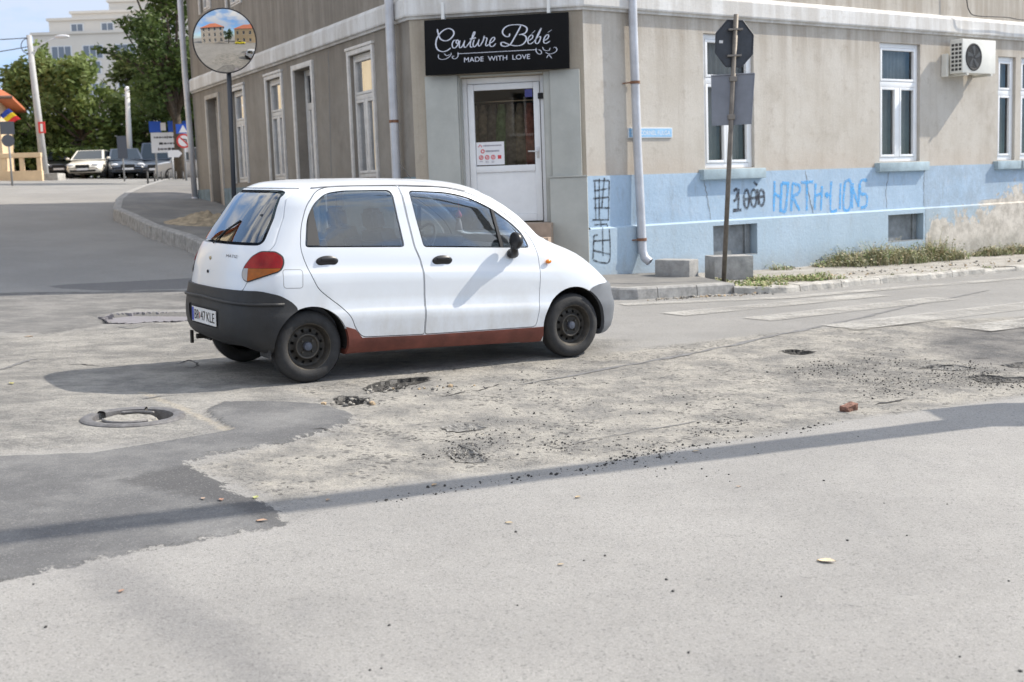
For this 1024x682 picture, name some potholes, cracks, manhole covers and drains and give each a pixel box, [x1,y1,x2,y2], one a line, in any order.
manhole cover [80,406,186,428]
pothole [363,377,429,392]
pothole [967,374,1024,383]
pothole [447,444,485,463]
pothole [334,395,370,406]
crack [518,290,987,385]
crack [567,420,697,446]
